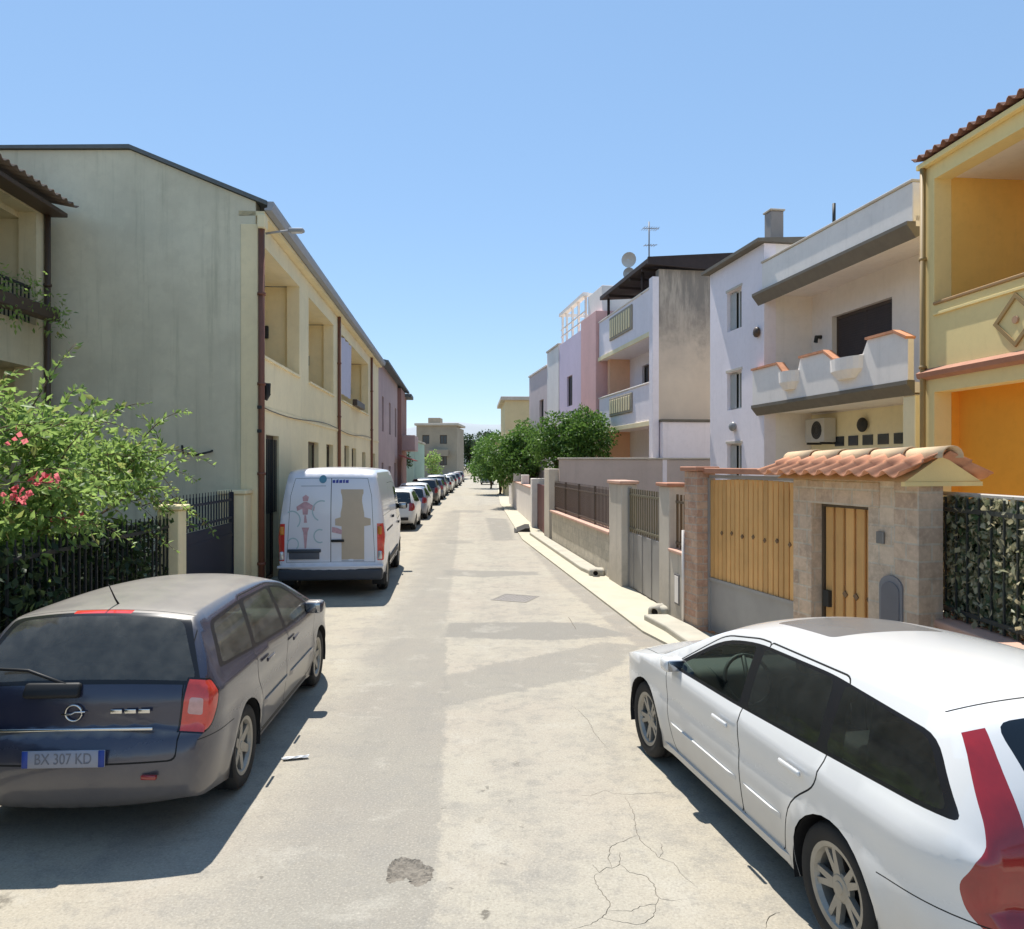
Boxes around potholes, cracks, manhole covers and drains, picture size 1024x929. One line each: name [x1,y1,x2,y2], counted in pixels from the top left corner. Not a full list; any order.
crack [575,790,692,929]
pothole [386,857,434,887]
manhole cover [491,594,539,603]
